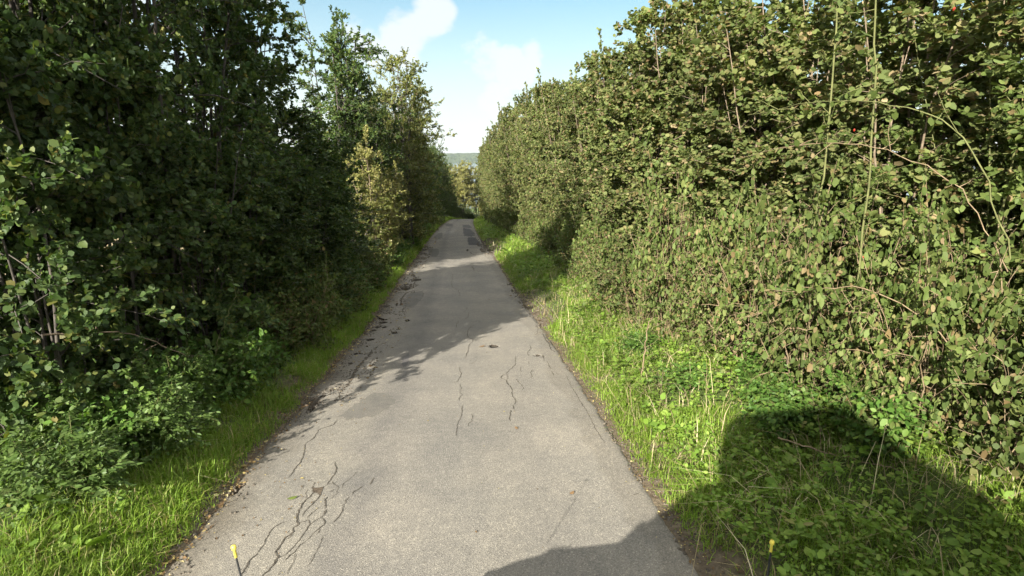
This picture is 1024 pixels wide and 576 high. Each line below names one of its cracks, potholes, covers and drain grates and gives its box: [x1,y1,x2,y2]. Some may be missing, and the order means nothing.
crack [241,343,383,576]
crack [501,298,605,443]
crack [453,313,473,436]
